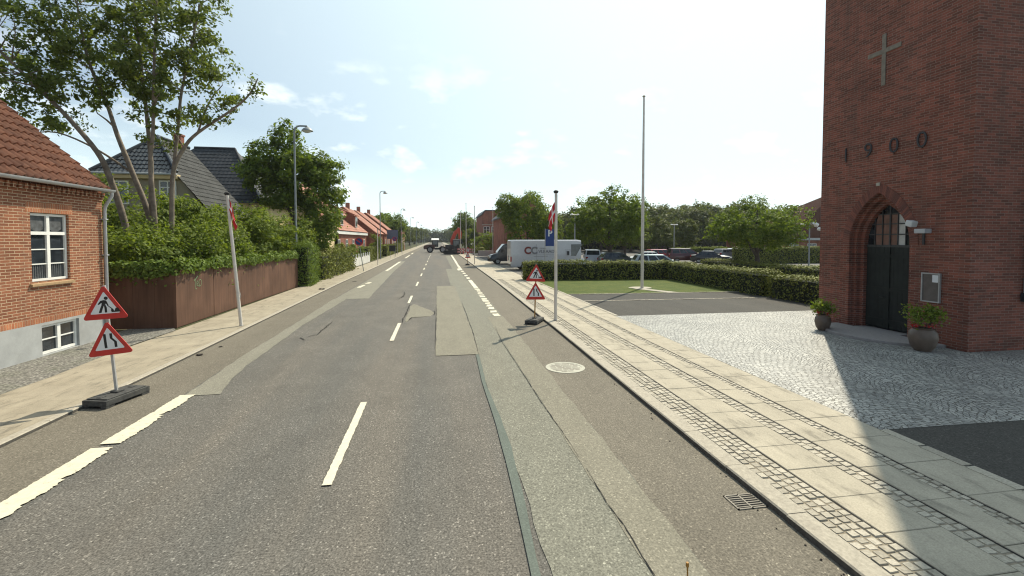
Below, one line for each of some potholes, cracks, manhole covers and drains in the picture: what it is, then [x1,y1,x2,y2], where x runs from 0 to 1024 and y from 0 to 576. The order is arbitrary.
drain grate [723,493,768,510]
manhole cover [546,362,585,373]
